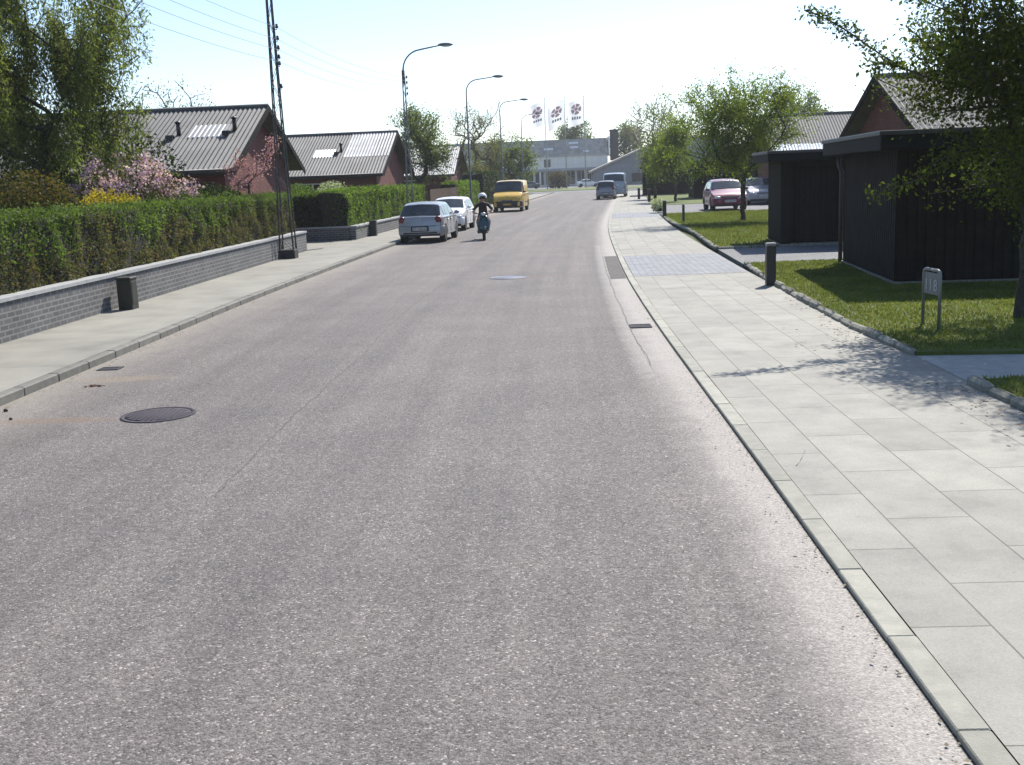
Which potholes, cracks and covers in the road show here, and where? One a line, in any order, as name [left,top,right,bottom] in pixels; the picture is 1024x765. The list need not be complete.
manhole cover [120,407,196,423]
crack [603,262,651,366]
